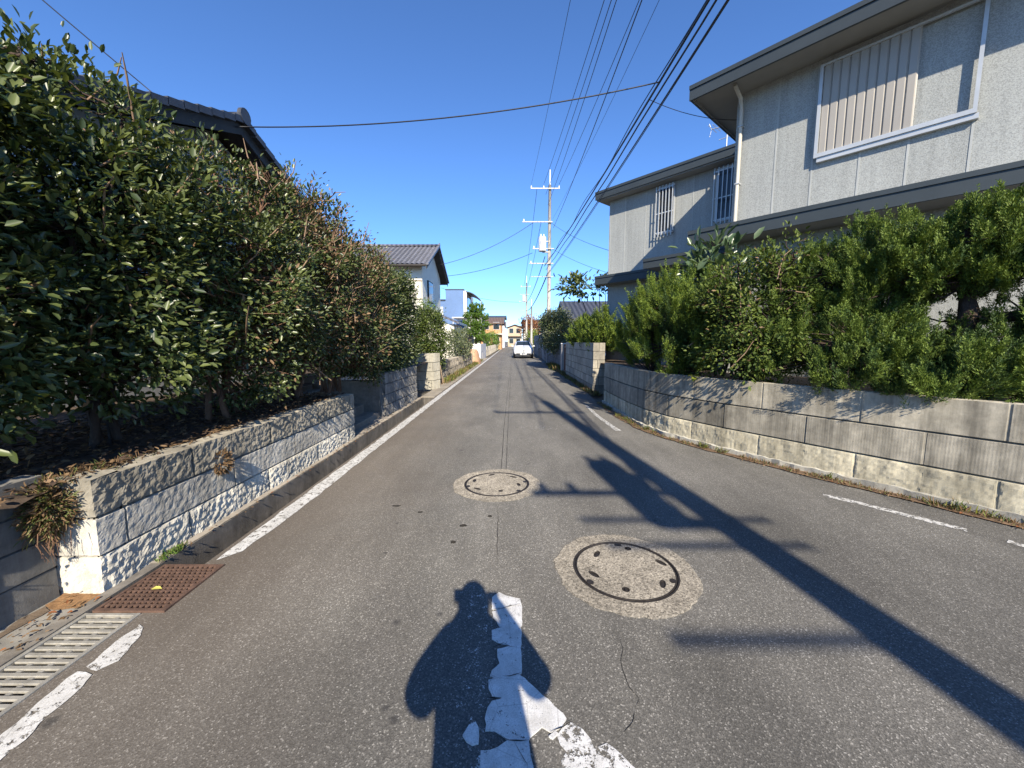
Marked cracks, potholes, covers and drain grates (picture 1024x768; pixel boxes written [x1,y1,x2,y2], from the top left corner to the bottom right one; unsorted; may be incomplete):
manhole cover [453,469,540,502]
drain grate [0,613,141,718]
manhole cover [553,534,703,620]
